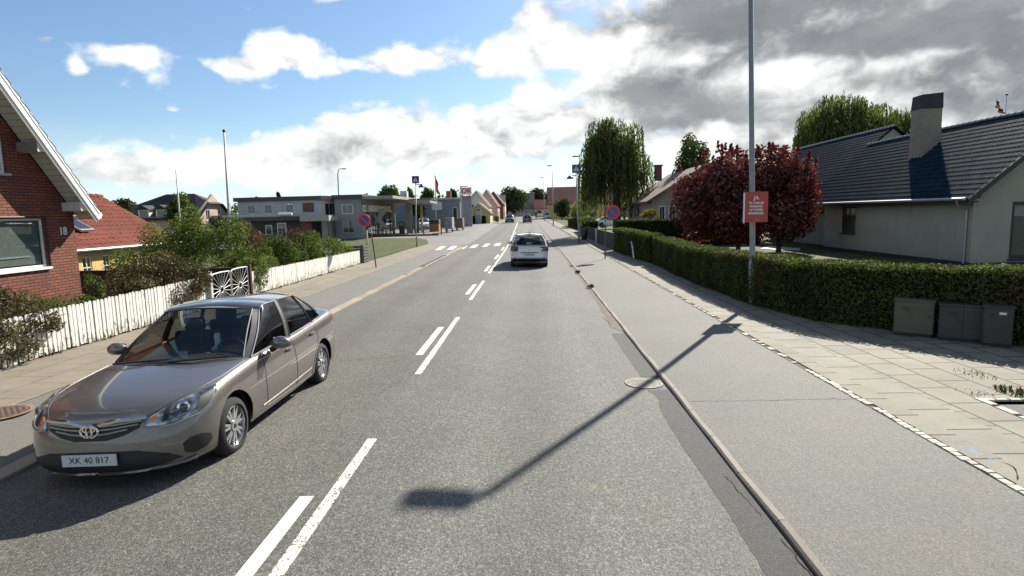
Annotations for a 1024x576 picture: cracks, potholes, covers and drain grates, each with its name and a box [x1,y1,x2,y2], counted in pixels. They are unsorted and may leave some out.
manhole cover [0,404,35,419]
manhole cover [625,378,663,388]
